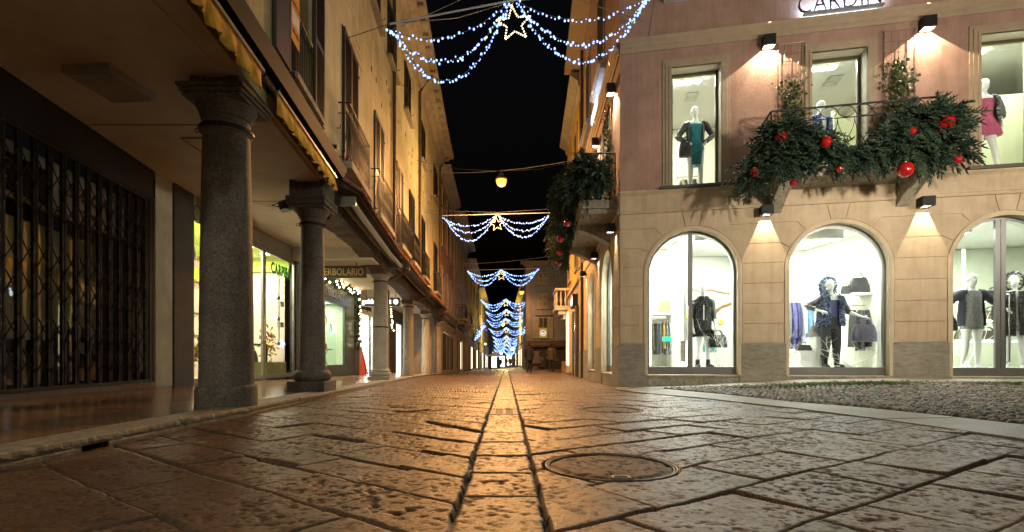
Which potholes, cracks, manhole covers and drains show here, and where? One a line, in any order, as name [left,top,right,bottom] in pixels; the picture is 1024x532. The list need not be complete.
manhole cover [545,453,678,483]
